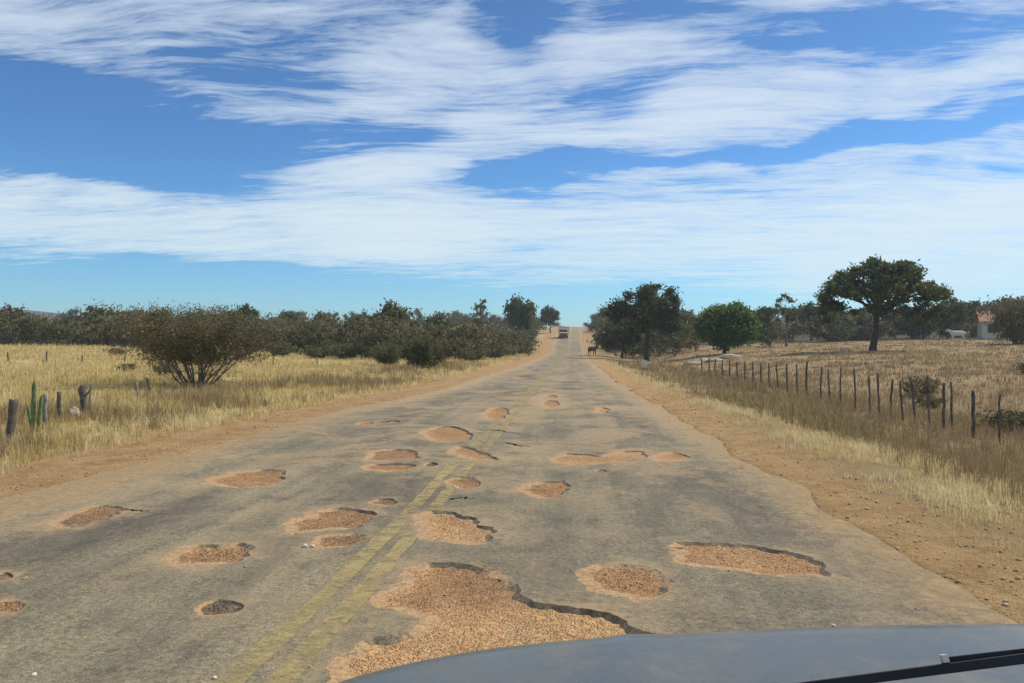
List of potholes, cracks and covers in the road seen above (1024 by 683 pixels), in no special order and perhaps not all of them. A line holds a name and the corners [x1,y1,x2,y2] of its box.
pothole [282,507,378,535]
pothole [444,477,481,489]
pothole [204,469,287,488]
pothole [0,599,26,613]
pothole [446,446,500,461]
pothole [326,562,655,683]
pothole [194,599,245,616]
pothole [515,480,571,499]
pothole [411,511,497,545]
pothole [160,543,256,566]
pothole [575,563,674,602]
pothole [357,463,417,472]
